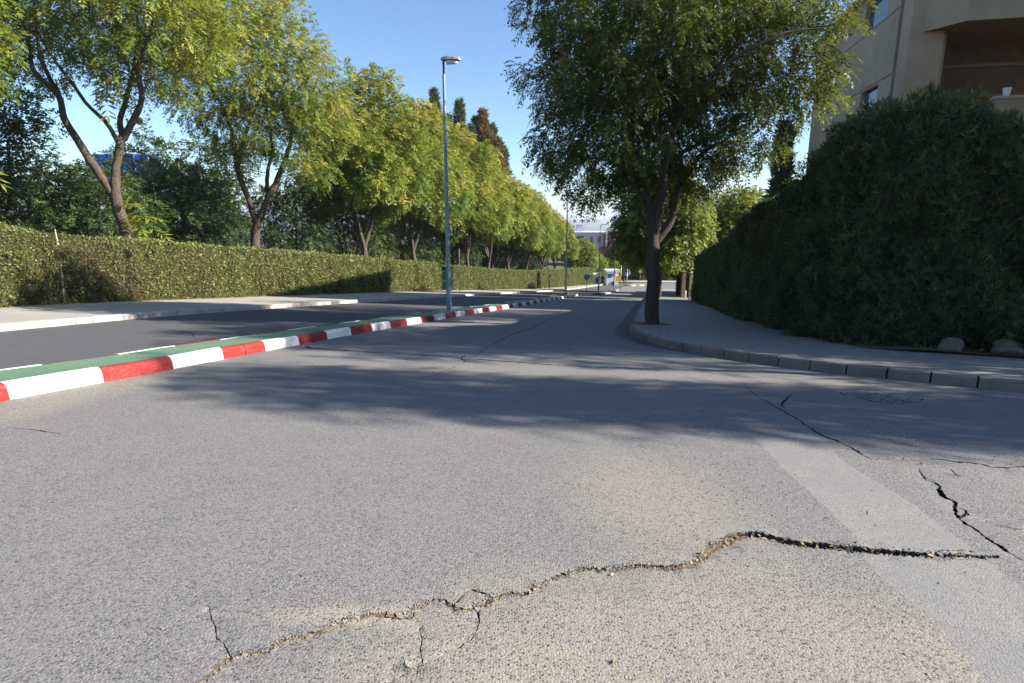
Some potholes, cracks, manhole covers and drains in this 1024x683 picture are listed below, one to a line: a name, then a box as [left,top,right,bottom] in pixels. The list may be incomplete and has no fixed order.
crack [745,386,871,459]
crack [195,458,1024,683]
